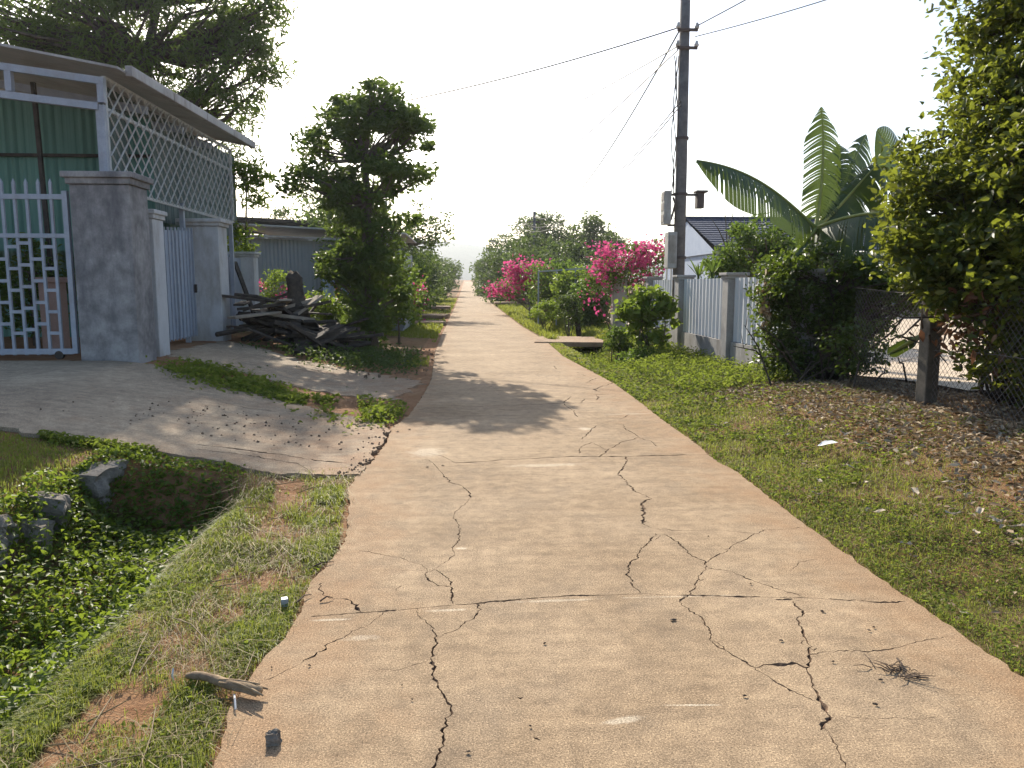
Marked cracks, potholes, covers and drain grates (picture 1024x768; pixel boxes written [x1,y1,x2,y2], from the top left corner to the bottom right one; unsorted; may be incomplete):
crack [365,460,482,768]
crack [263,583,384,680]
crack [563,375,948,767]
